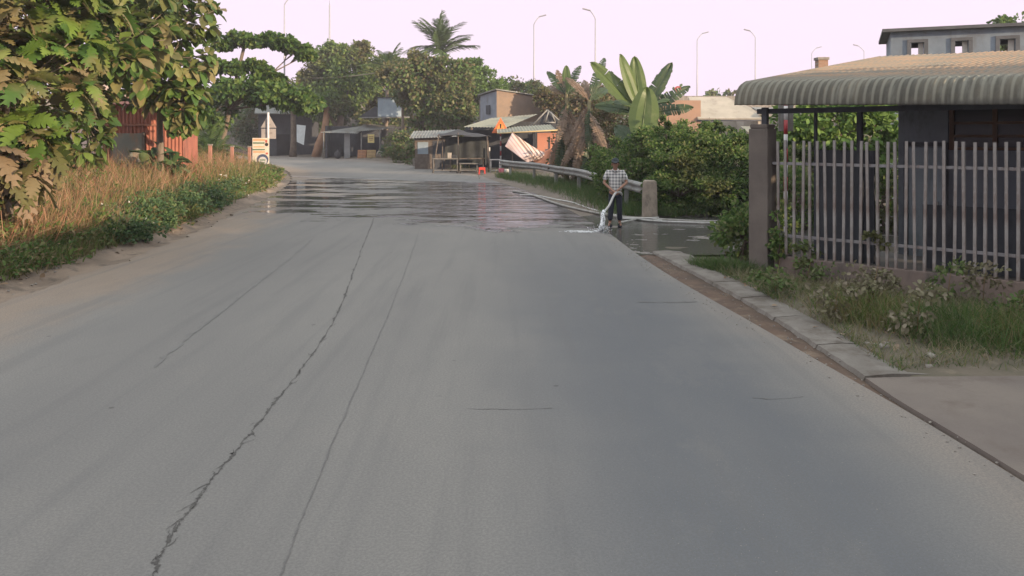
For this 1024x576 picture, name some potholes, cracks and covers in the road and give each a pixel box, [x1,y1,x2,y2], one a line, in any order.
crack [151,221,373,576]
